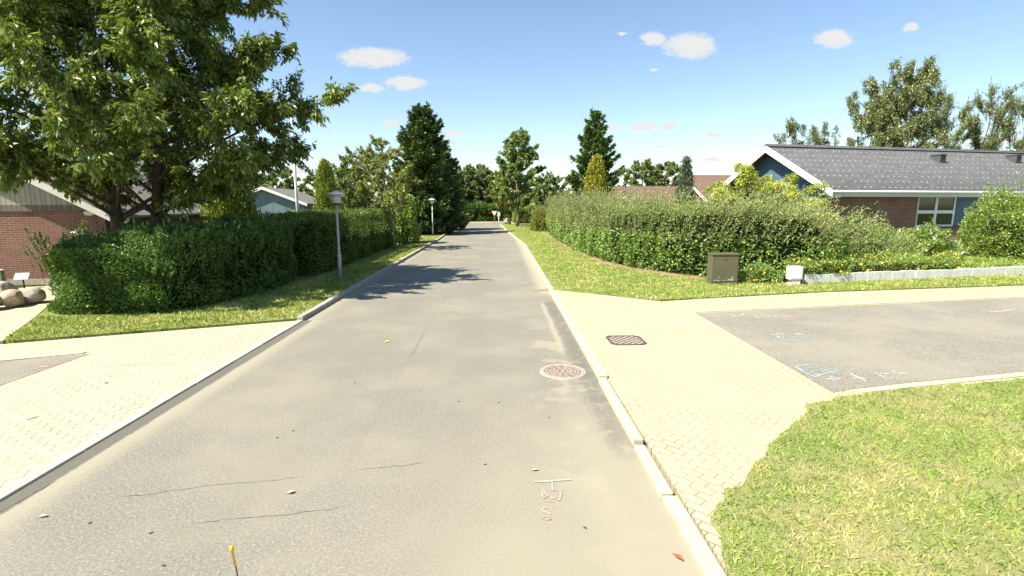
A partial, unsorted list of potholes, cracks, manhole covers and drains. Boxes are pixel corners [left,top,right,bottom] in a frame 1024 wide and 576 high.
manhole cover [540,364,586,379]
